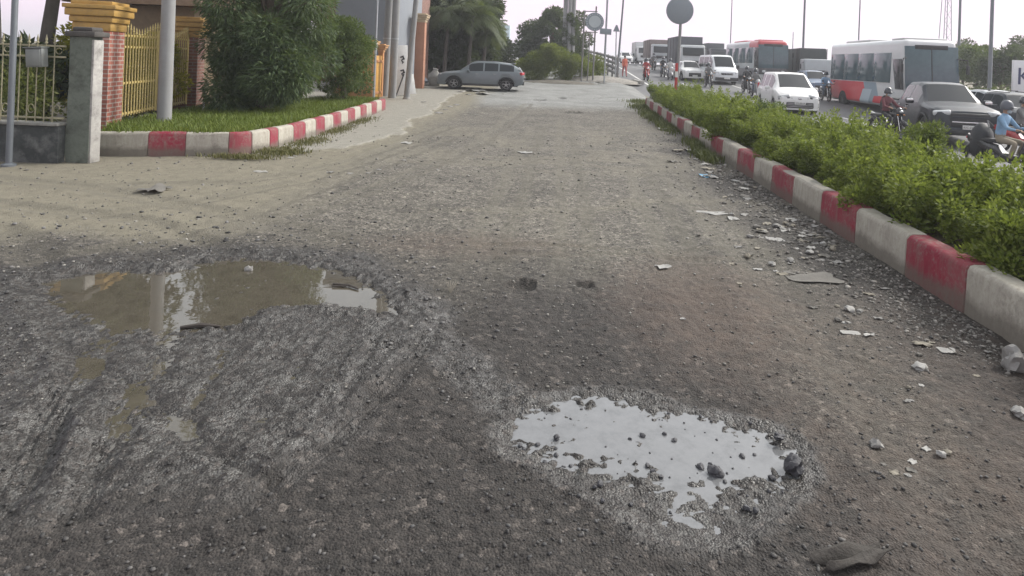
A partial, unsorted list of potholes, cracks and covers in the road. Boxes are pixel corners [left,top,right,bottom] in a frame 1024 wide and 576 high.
pothole [502,280,536,293]
pothole [15,253,424,457]
pothole [494,389,818,551]
